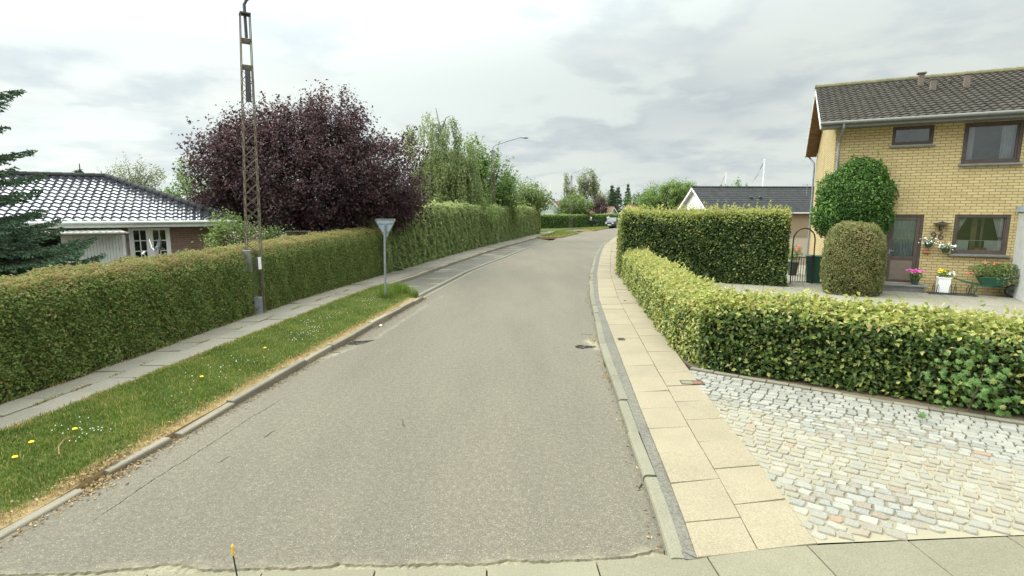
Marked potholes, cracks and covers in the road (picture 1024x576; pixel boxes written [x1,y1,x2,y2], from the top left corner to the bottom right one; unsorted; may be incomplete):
crack [91,399,281,522]
